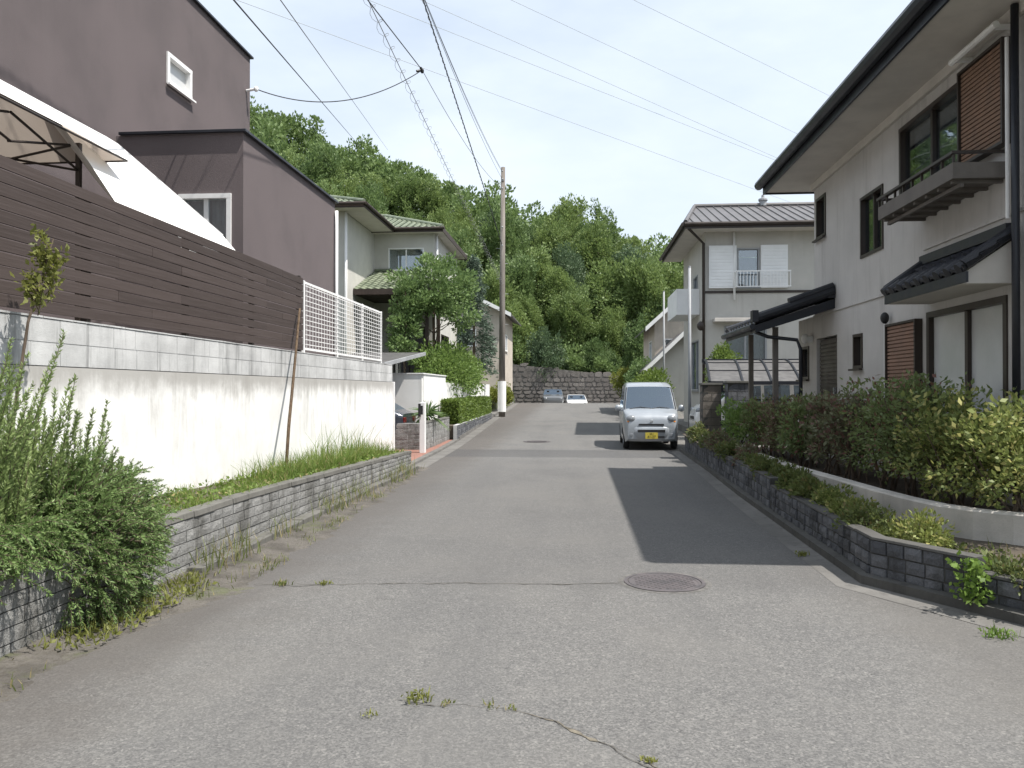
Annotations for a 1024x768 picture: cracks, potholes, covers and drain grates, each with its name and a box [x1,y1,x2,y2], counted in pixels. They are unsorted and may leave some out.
manhole cover [618,572,712,594]
crack [405,700,658,768]
